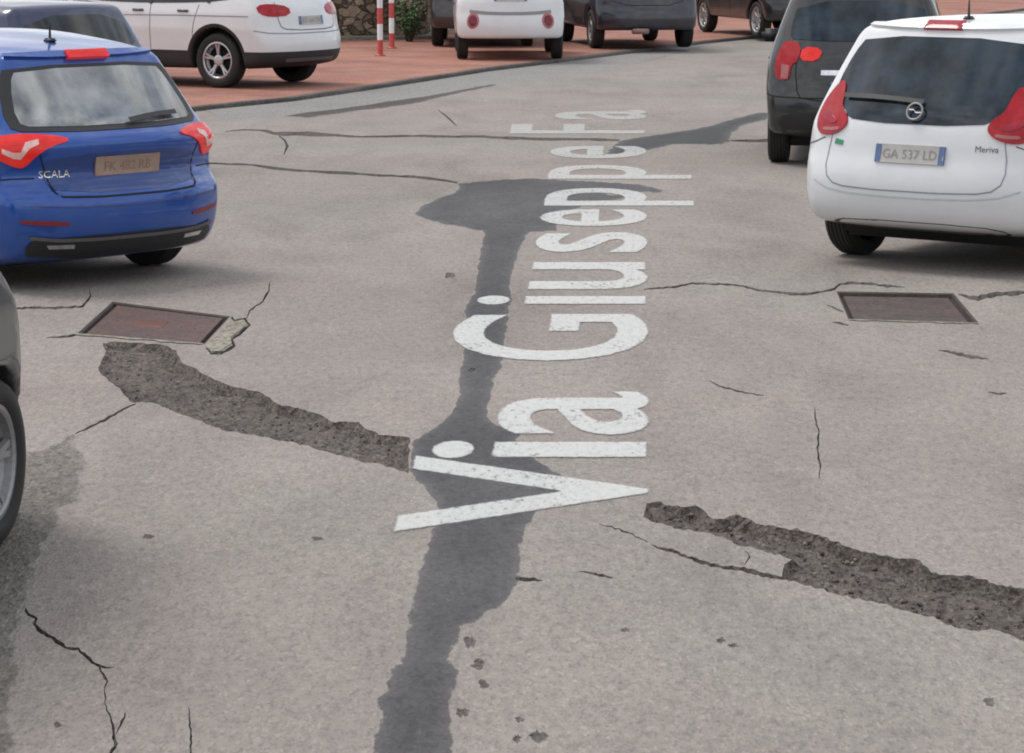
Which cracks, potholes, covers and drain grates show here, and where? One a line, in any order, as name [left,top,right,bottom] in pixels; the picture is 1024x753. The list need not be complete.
crack [644,281,905,326]
pothole [529,730,549,744]
crack [600,524,786,580]
pothole [470,658,485,670]
crack [959,291,1024,301]
pothole [463,636,476,649]
crack [75,403,136,434]
crack [17,288,91,309]
crack [206,283,270,355]
manhole cover [837,292,979,324]
crack [25,608,126,753]
pothole [98,341,410,473]
